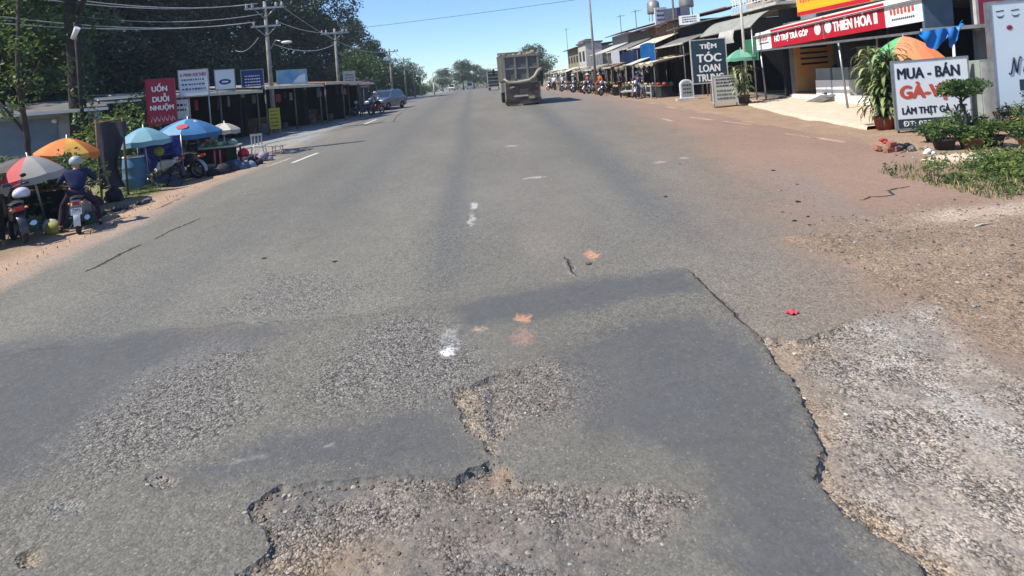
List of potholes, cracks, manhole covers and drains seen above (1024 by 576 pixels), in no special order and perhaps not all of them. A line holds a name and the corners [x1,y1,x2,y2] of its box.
crack [87,218,200,271]
crack [863,186,910,200]
pothole [14,547,47,570]
pothole [450,360,569,456]
crack [563,257,577,276]
pothole [760,299,1024,576]
pothole [144,474,182,490]
pothole [236,459,713,576]
